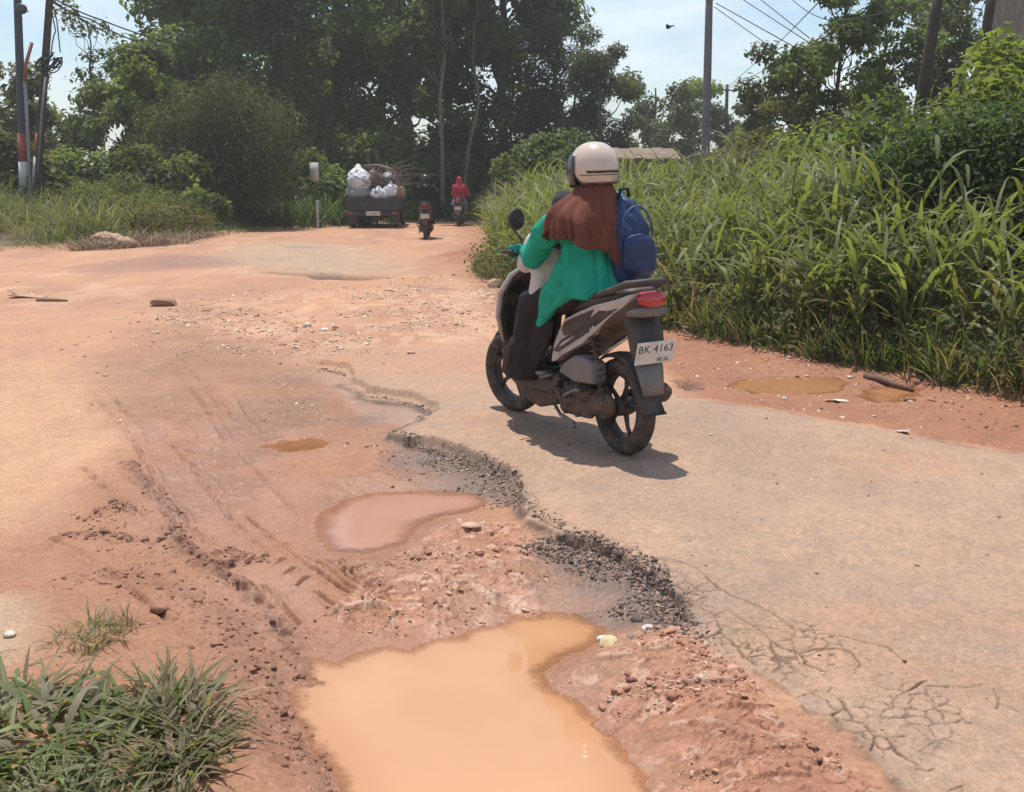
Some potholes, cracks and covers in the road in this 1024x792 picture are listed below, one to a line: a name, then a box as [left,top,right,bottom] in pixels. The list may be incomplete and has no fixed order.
pothole [718,373,855,394]
pothole [253,594,704,792]
pothole [373,436,520,507]
pothole [248,433,350,456]
pothole [301,485,495,557]
pothole [509,537,684,636]
crack [521,488,1024,792]
